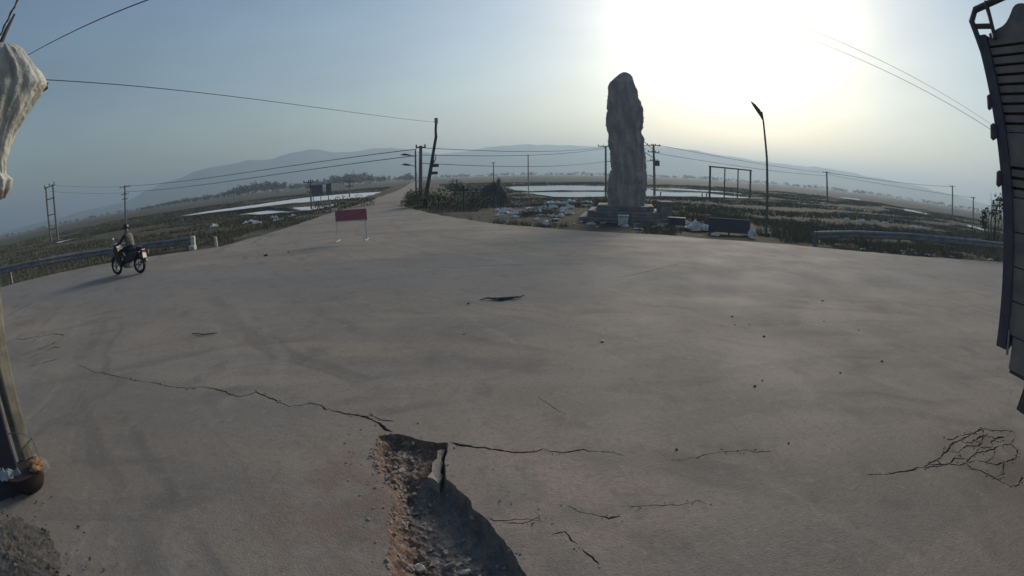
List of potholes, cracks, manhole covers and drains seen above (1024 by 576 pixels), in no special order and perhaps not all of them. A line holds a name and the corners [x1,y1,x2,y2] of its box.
crack [488,500,707,565]
crack [84,367,392,432]
crack [869,428,1023,486]
crack [450,442,620,455]
pothole [370,434,526,576]
